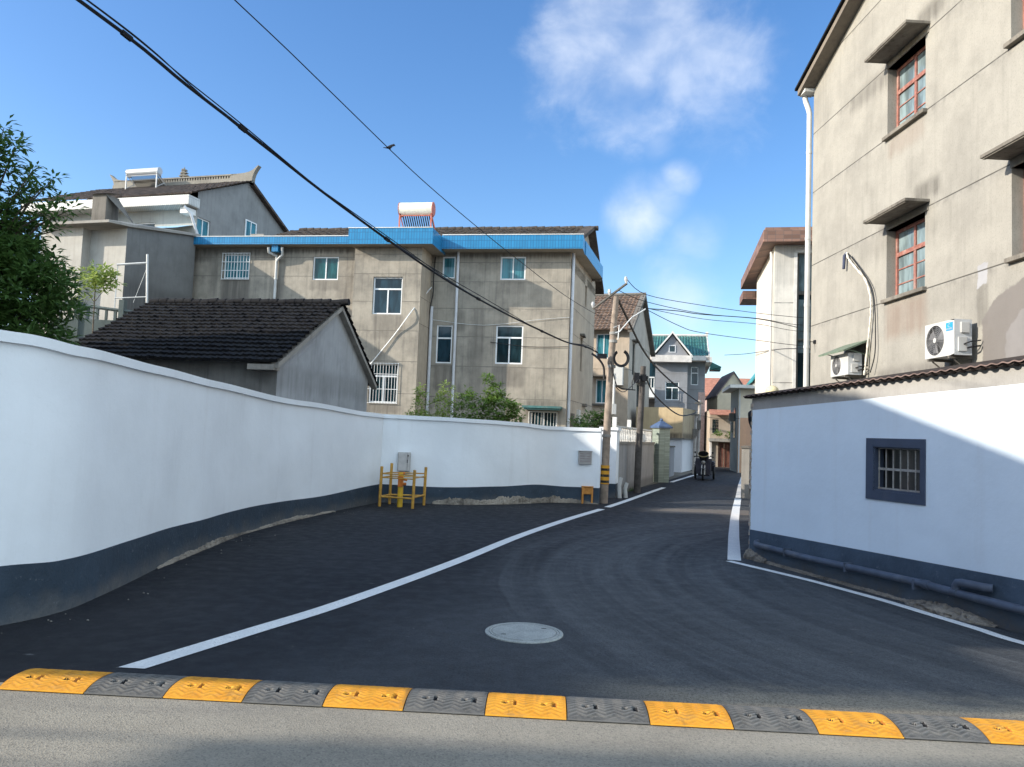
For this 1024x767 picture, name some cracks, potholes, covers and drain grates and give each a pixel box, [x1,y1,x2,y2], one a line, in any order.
manhole cover [485,622,563,644]
